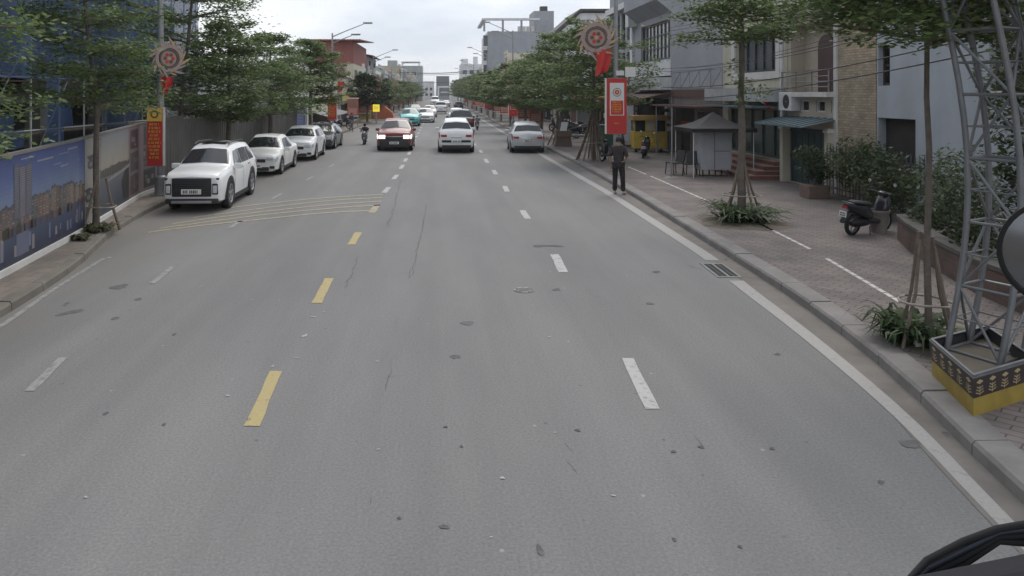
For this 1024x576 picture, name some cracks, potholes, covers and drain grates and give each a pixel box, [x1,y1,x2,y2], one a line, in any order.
drain grate [699,263,743,278]
